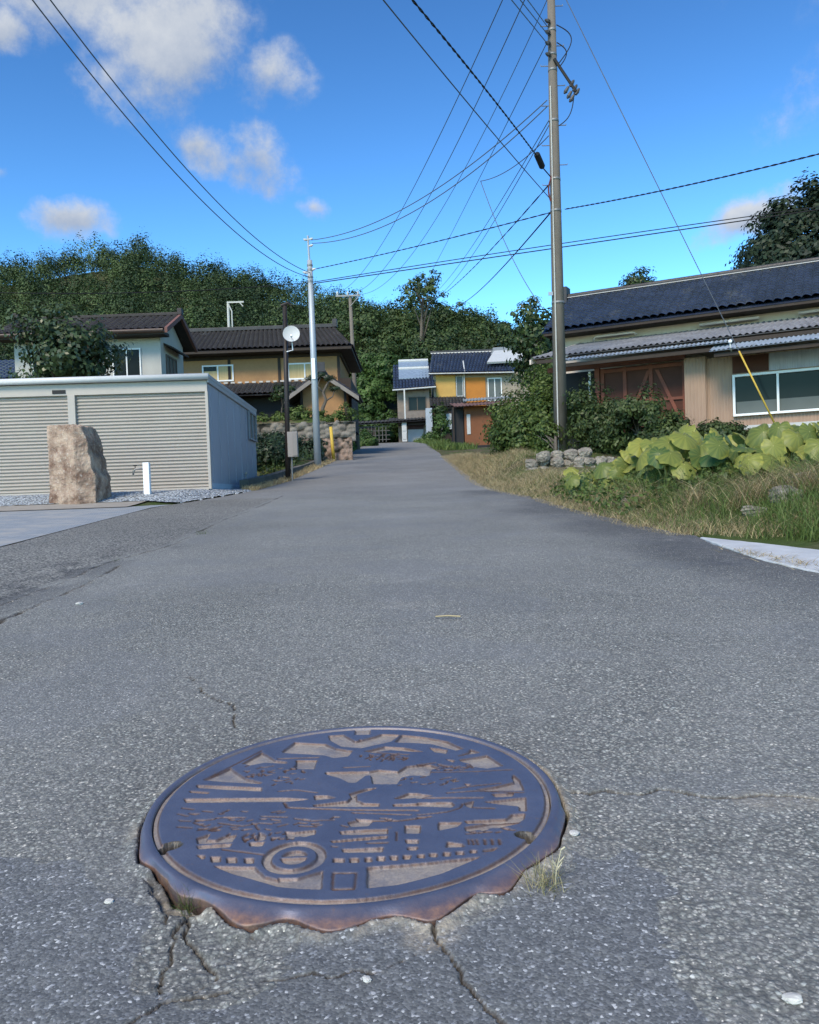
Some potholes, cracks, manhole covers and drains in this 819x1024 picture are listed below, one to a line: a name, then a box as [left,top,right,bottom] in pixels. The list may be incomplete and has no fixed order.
crack [556,786,819,801]
crack [121,910,511,1024]
manhole cover [139,726,565,933]
crack [185,676,238,728]
